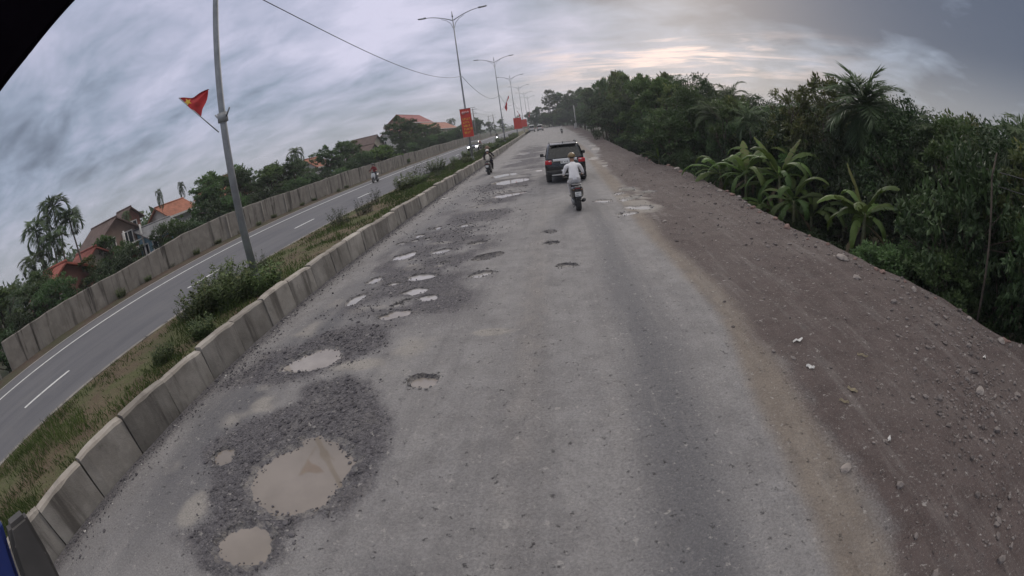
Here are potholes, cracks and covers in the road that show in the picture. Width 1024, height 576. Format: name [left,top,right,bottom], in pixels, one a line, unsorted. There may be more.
pothole [468,270,493,278]
pothole [345,293,367,306]
pothole [211,445,236,466]
pothole [242,428,364,520]
pothole [471,251,505,261]
pothole [407,373,439,388]
pothole [278,345,345,373]
pothole [379,309,413,320]
pothole [210,519,277,572]
pothole [406,272,440,281]
pothole [391,251,417,261]
